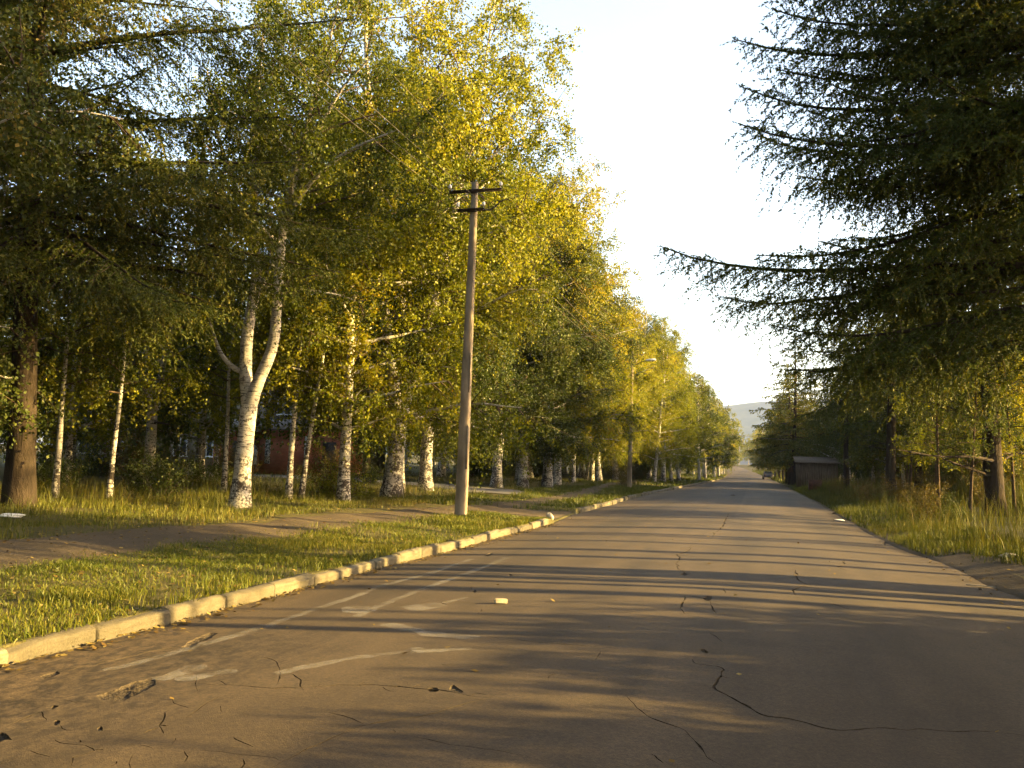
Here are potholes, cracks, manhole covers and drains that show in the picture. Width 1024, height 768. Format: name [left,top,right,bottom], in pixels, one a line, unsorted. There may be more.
crack [692,659,1018,735]
pothole [96,678,156,701]
crack [1,658,523,768]
crack [628,698,723,767]
